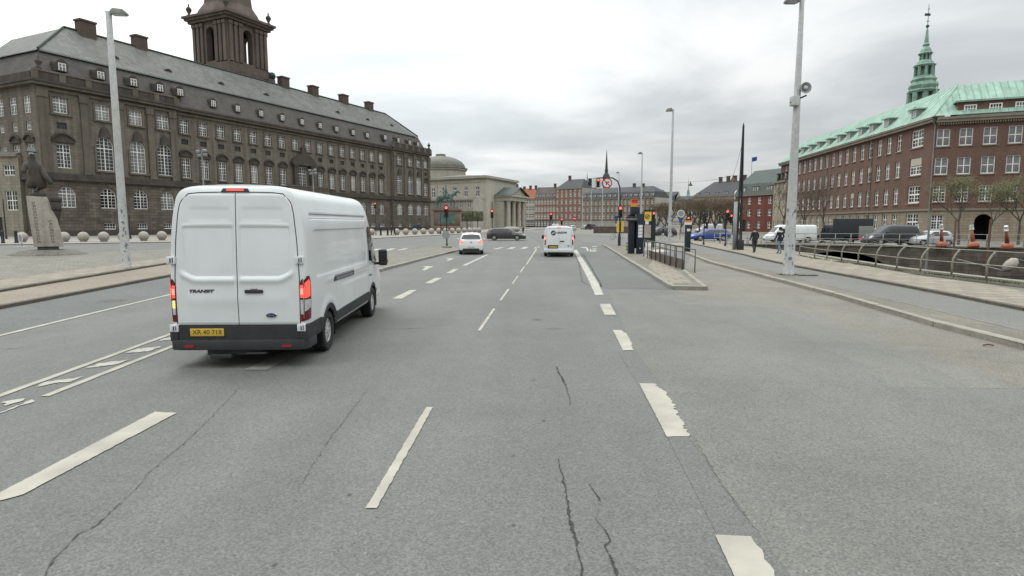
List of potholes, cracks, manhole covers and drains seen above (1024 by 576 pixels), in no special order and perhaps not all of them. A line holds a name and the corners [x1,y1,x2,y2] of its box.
crack [558,459,618,576]
crack [297,395,363,491]
crack [45,390,236,576]
